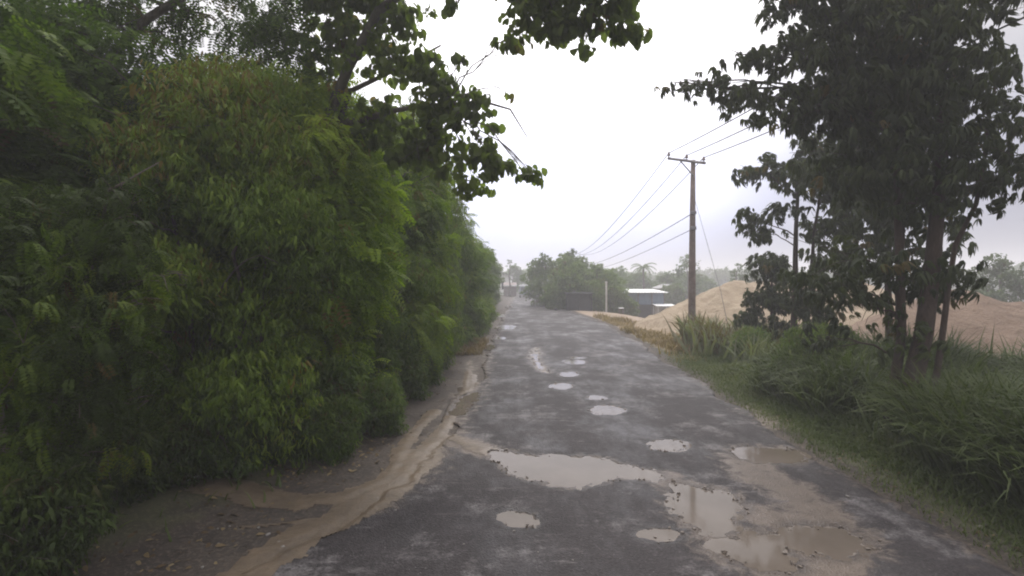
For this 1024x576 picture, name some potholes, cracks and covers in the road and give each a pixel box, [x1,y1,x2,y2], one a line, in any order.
pothole [549,382,573,390]
pothole [636,526,684,544]
pothole [646,439,694,452]
pothole [529,348,550,373]
pothole [663,479,750,538]
pothole [496,510,540,529]
pothole [488,449,664,491]
pothole [725,445,812,465]
pothole [586,404,628,415]
pothole [703,522,881,575]
